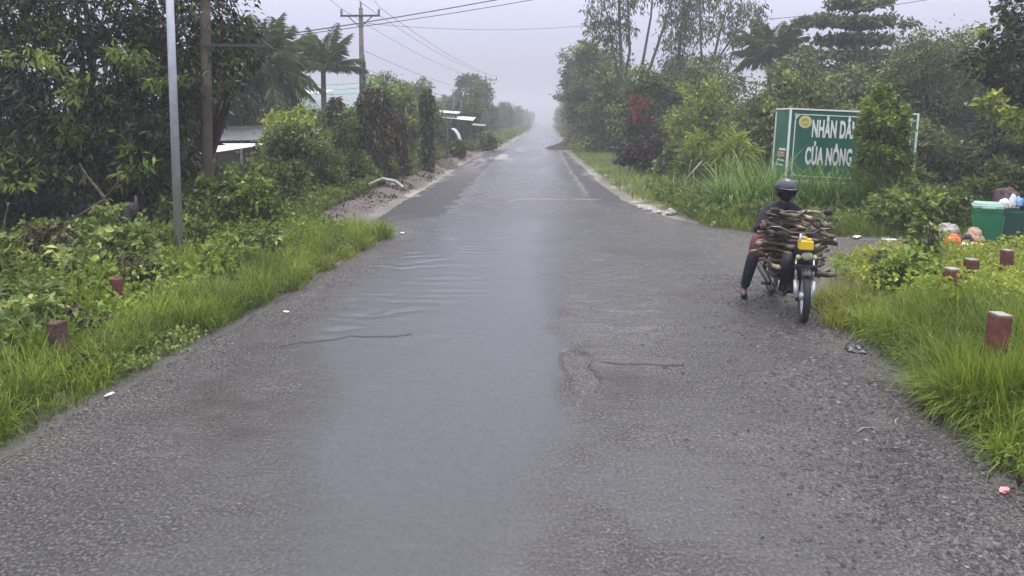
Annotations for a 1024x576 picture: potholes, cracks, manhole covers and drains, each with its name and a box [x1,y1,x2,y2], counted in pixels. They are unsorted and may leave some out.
pothole [558,347,604,398]
crack [275,334,408,348]
